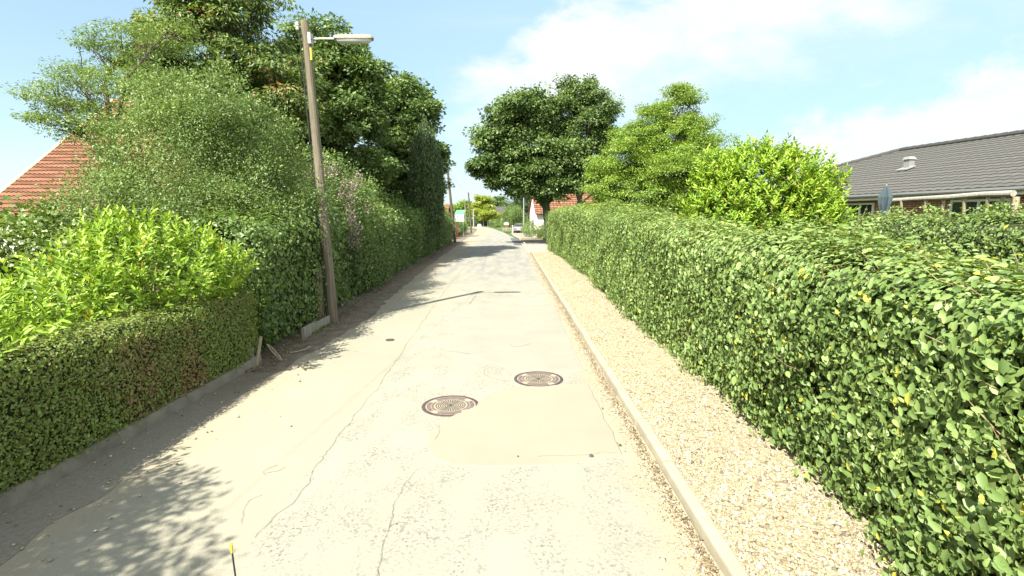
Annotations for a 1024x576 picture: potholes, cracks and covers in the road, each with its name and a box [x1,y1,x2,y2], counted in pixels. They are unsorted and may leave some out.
manhole cover [514,371,563,386]
manhole cover [422,395,479,417]
